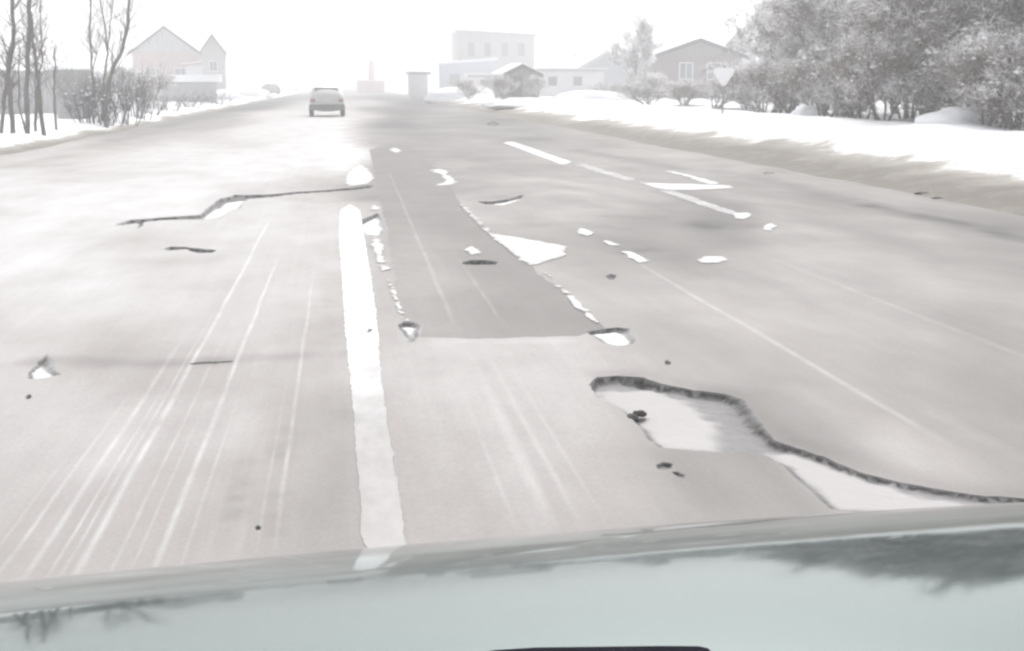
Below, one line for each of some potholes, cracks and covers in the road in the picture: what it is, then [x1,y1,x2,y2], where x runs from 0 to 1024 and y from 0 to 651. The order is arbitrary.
pothole [587,327,638,346]
pothole [589,376,1024,512]
crack [116,185,373,228]
pothole [27,354,62,379]
pothole [398,322,423,342]
